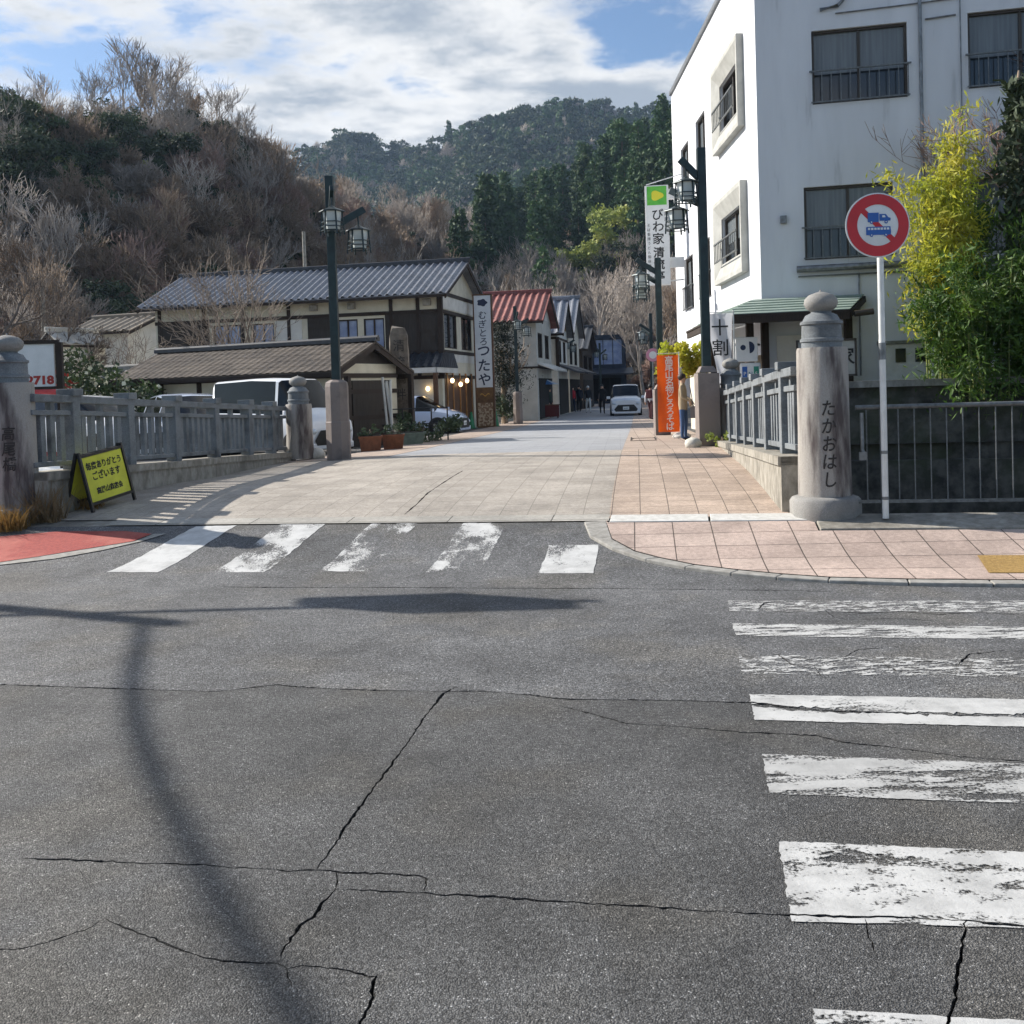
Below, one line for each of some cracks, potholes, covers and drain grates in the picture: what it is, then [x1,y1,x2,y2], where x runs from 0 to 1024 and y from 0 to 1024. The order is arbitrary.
crack [0,684,1024,1024]
